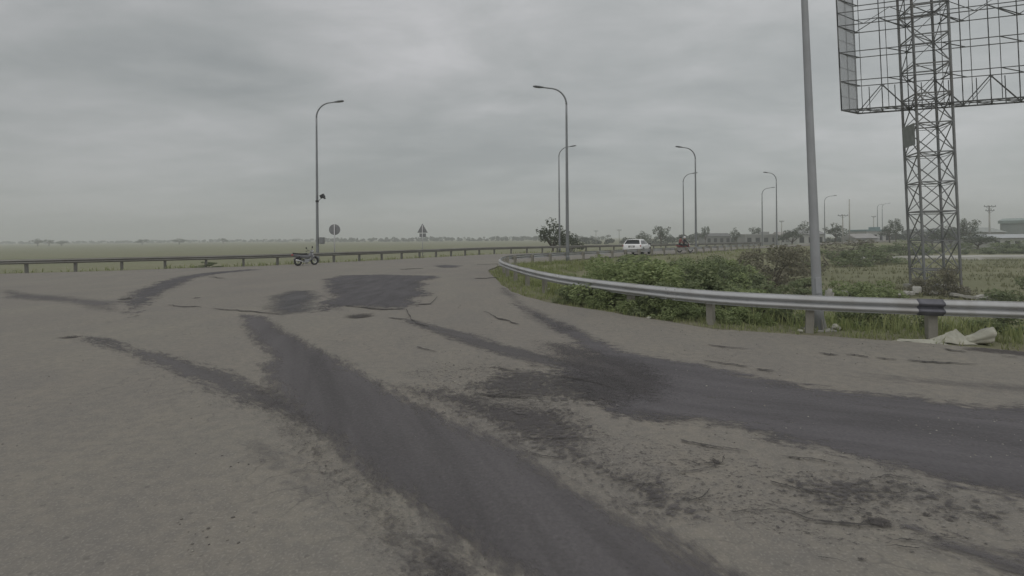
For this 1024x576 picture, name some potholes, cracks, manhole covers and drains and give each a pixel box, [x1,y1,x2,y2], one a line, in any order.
crack [344,297,437,326]
